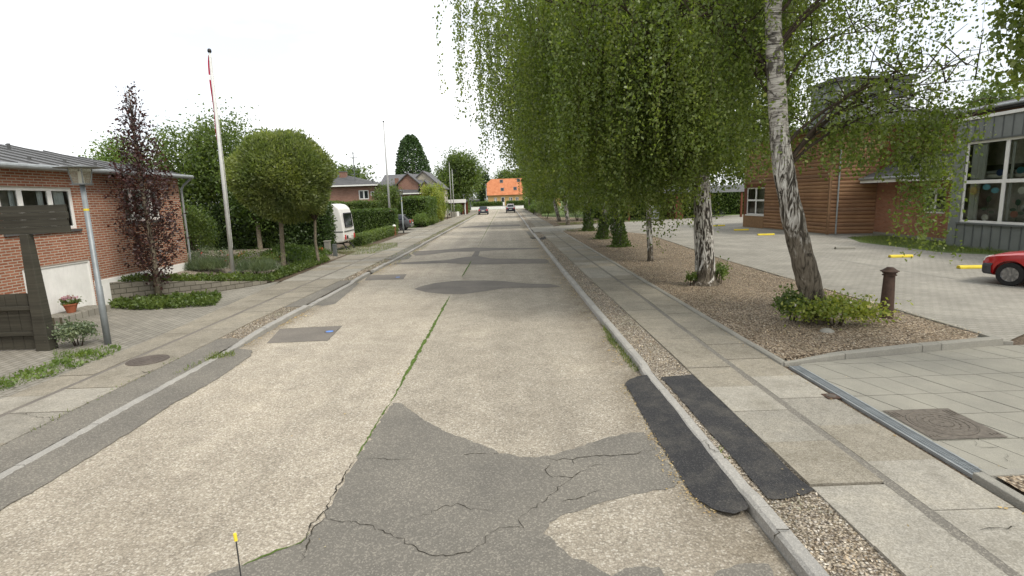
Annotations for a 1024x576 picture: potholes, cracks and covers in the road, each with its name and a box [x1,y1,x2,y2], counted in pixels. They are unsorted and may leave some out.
crack [324,451,641,556]
crack [300,463,352,559]
manhole cover [882,408,1007,440]
manhole cover [125,354,170,366]
